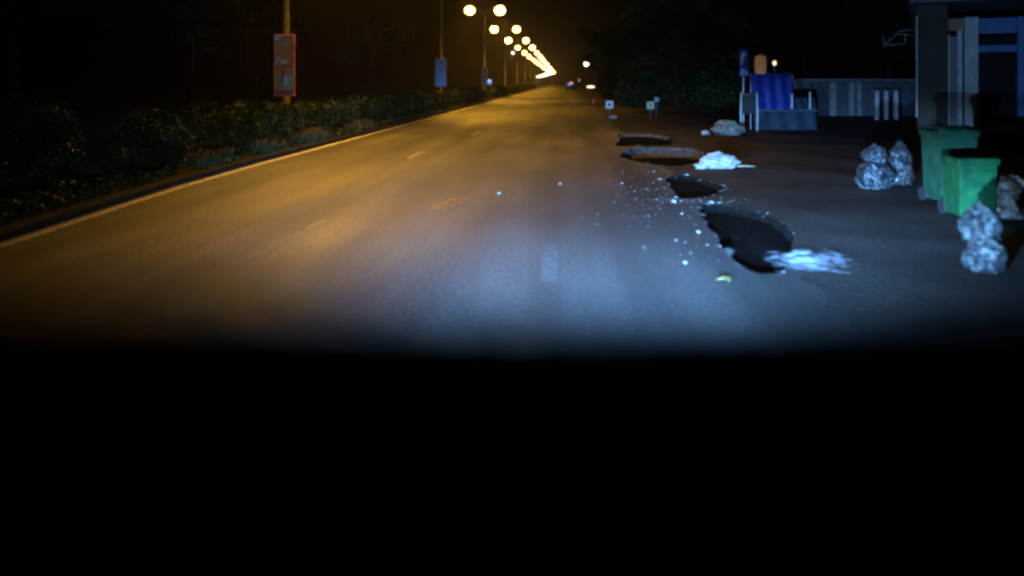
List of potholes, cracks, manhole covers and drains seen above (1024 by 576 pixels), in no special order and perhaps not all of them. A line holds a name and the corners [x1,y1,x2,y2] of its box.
pothole [620,147,706,166]
pothole [691,205,794,274]
pothole [613,134,675,146]
pothole [665,175,724,199]
